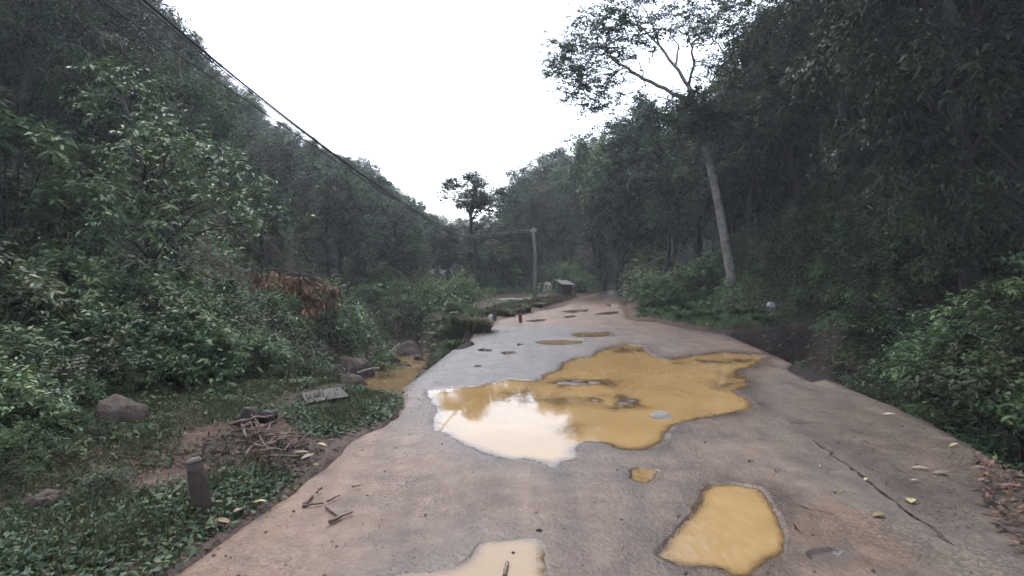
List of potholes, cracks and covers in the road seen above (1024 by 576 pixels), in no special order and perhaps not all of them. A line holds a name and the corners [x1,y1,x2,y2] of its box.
pothole [628,466,661,483]
pothole [386,538,551,576]
pothole [423,343,769,469]
crack [793,505,834,537]
pothole [805,546,845,561]
pothole [652,482,789,576]
